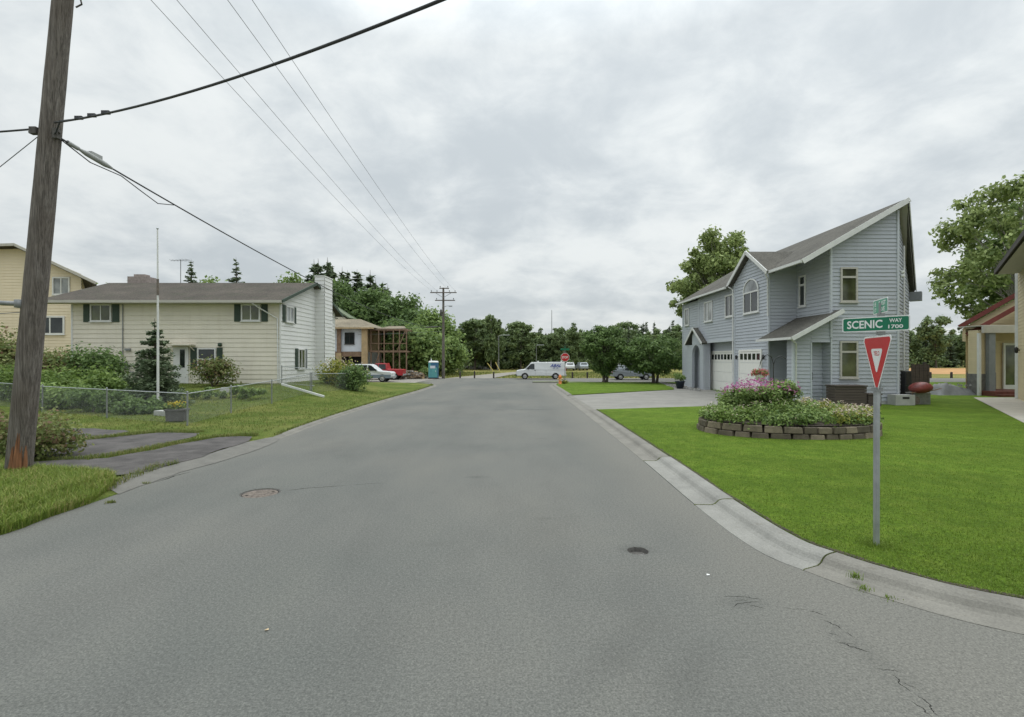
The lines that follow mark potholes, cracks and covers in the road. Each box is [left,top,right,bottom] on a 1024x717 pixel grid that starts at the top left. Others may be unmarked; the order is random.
crack [783,607,937,717]
manhole cover [239,488,281,498]
